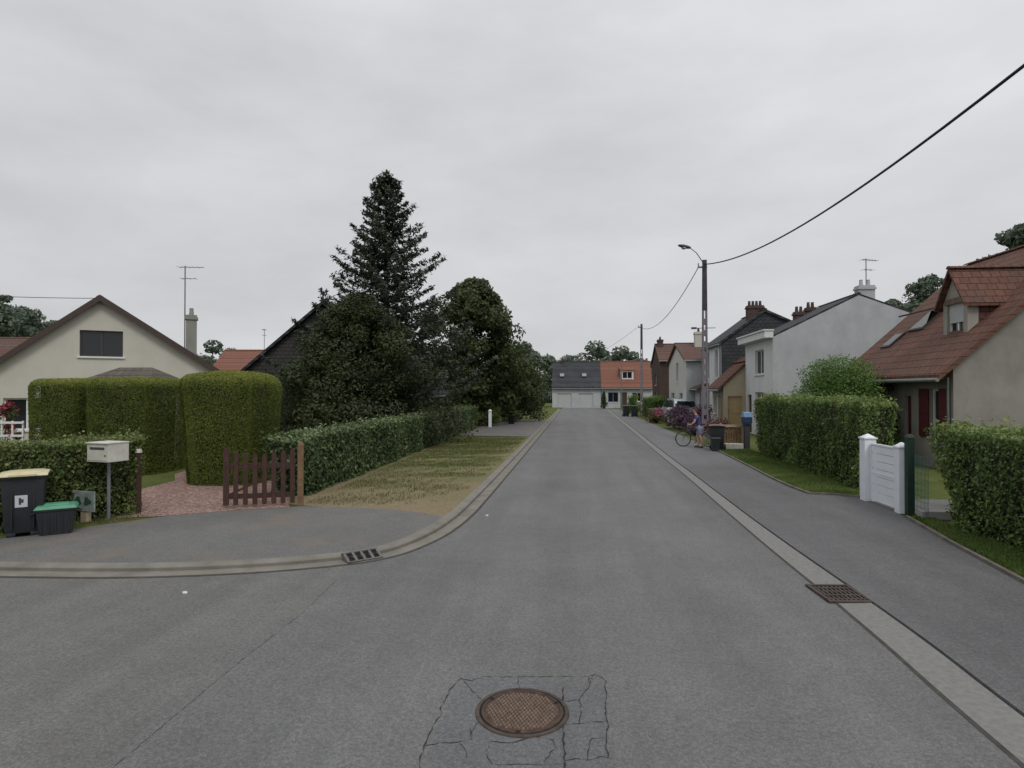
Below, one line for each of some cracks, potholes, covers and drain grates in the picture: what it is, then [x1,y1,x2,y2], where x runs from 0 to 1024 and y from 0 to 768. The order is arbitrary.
manhole cover [475,688,569,738]
crack [419,674,609,768]
drain grate [805,584,873,604]
drain grate [341,547,383,564]
